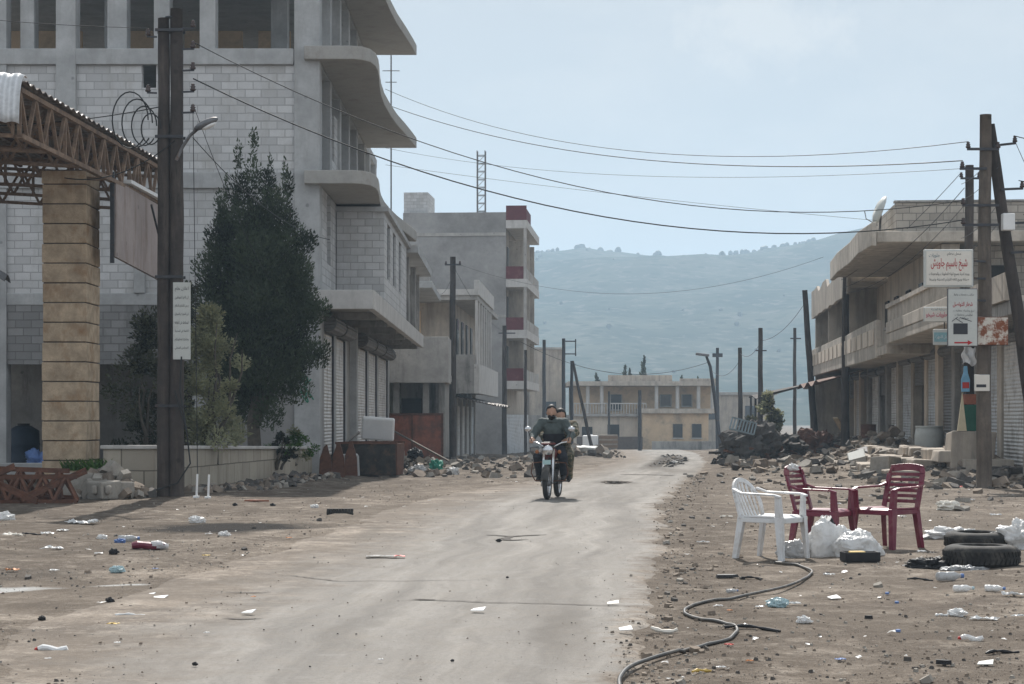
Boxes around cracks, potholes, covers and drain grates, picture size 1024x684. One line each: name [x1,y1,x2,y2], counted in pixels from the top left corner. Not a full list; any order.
crack [261,573,481,581]
